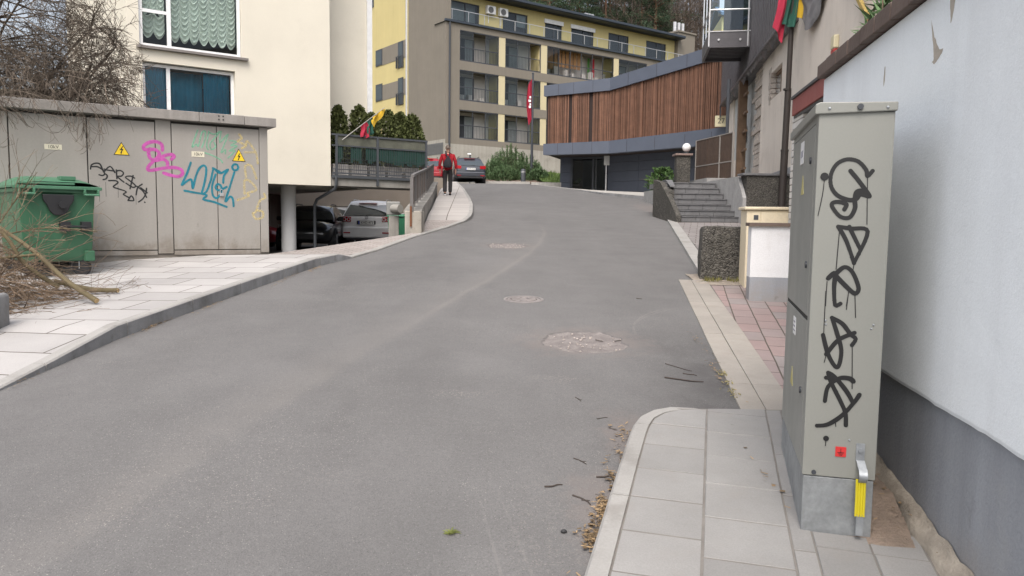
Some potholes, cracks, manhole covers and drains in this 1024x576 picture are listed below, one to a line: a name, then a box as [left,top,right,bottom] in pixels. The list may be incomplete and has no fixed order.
manhole cover [504,295,544,303]
